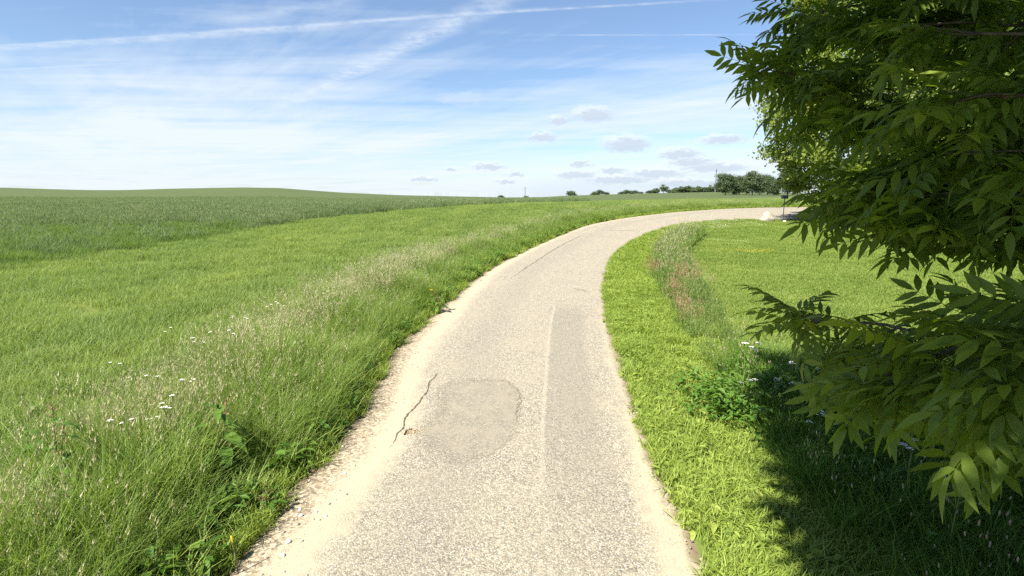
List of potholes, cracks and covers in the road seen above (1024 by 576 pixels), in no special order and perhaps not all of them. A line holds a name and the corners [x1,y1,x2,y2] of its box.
crack [389,375,436,448]
